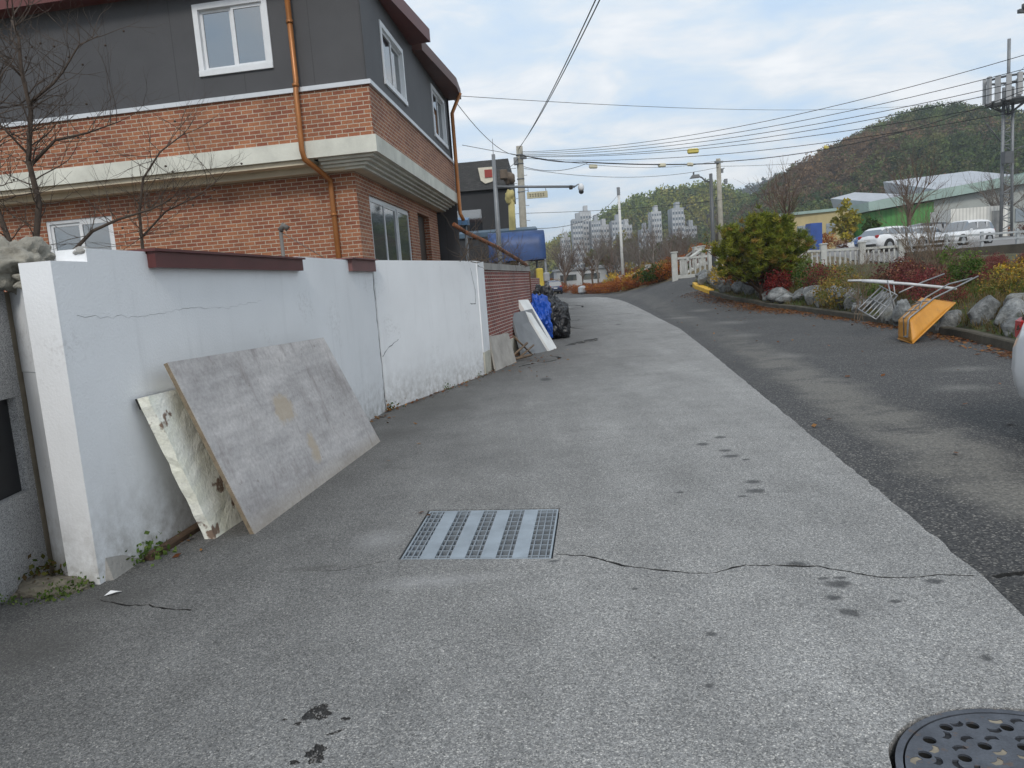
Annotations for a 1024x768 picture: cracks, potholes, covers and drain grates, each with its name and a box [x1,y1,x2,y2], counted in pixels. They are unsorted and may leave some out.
drain grate [401,509,559,559]
crack [100,599,191,611]
manhole cover [892,709,1024,768]
crack [559,554,1024,578]
